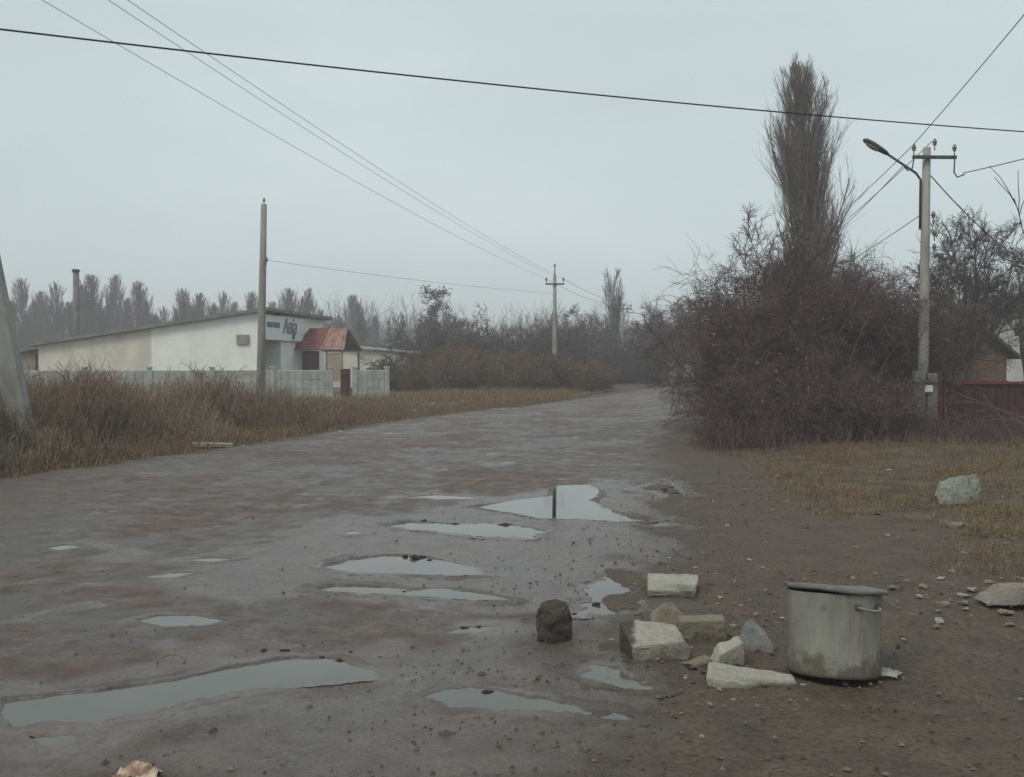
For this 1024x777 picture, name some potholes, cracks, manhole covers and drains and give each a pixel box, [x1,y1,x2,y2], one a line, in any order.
pothole [566,567,653,620]
pothole [32,541,96,553]
pothole [292,578,530,606]
pothole [306,551,501,581]
pothole [0,651,397,738]
pothole [129,568,220,581]
pothole [466,484,677,524]
pothole [401,681,660,729]
pothole [117,611,244,630]
pothole [363,519,556,541]
pothole [552,659,679,700]
